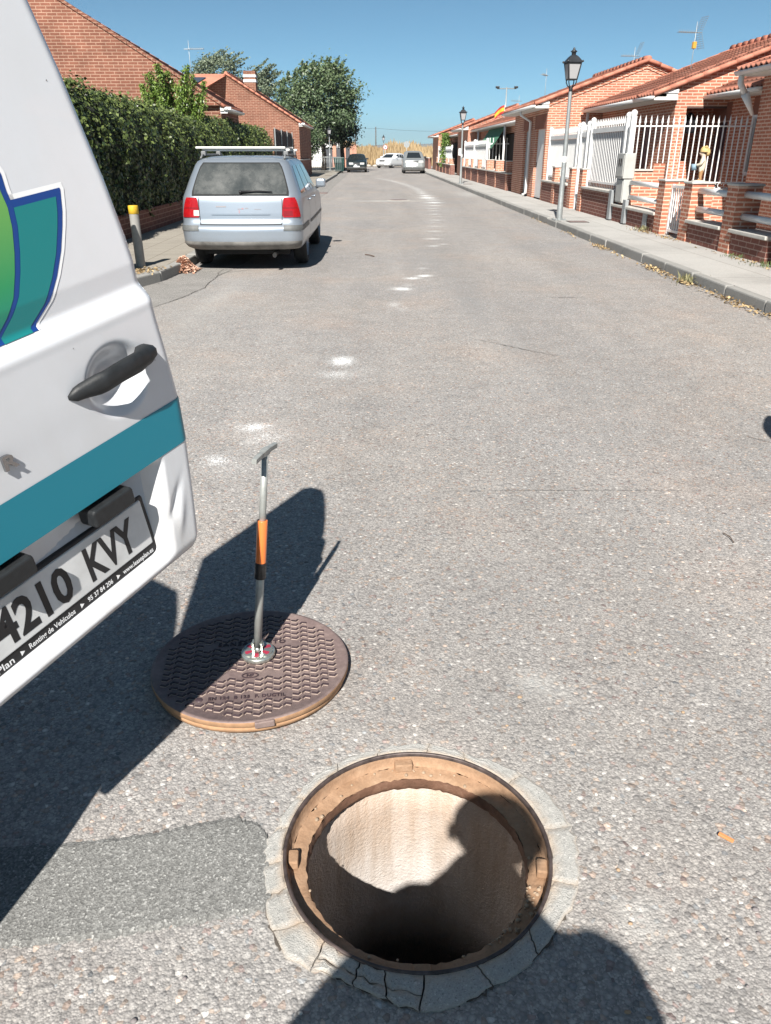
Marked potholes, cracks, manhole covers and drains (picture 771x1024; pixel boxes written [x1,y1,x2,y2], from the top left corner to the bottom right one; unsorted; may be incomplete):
manhole cover [151,611,348,733]
manhole cover [263,743,580,1013]
